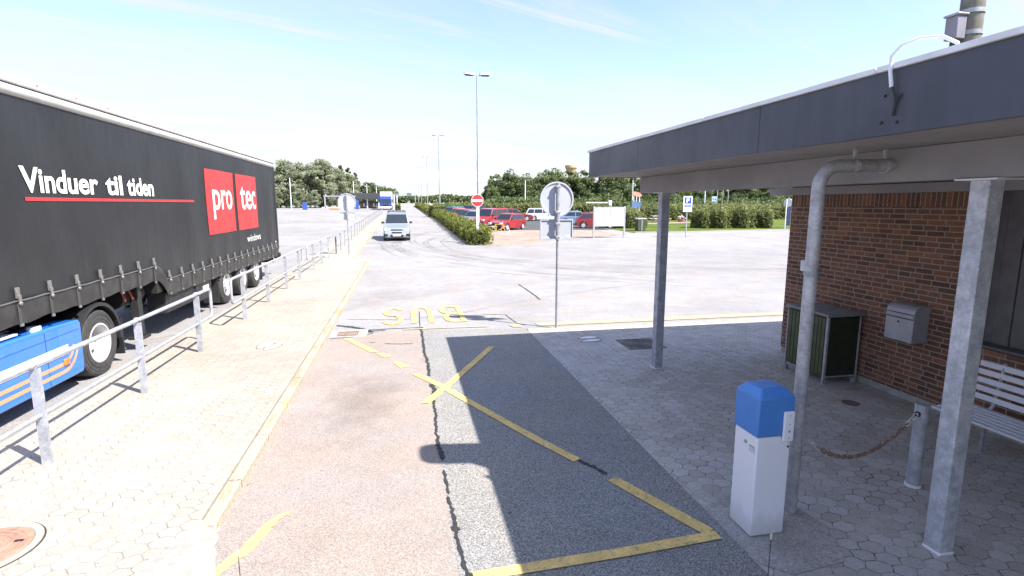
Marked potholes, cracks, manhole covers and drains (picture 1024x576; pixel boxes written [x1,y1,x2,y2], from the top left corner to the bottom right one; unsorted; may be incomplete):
drain grate [328,329,368,338]
manhole cover [0,521,47,568]
